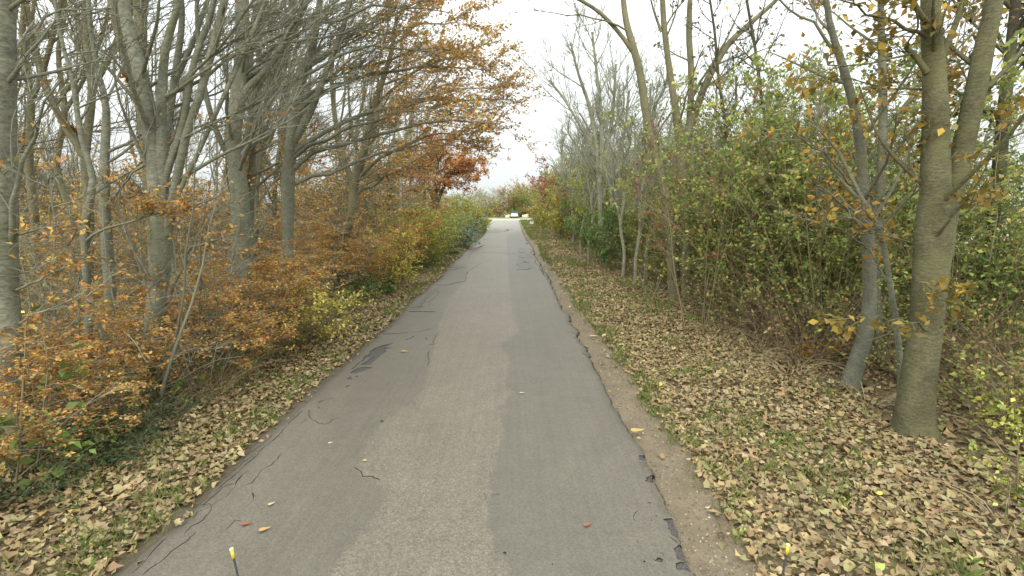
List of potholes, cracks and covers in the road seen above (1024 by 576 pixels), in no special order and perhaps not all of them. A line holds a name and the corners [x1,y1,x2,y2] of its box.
crack [517,249,548,280]
pothole [674,545,686,563]
crack [132,398,338,573]
pothole [351,343,393,373]
pothole [663,518,679,539]
crack [409,229,509,312]
